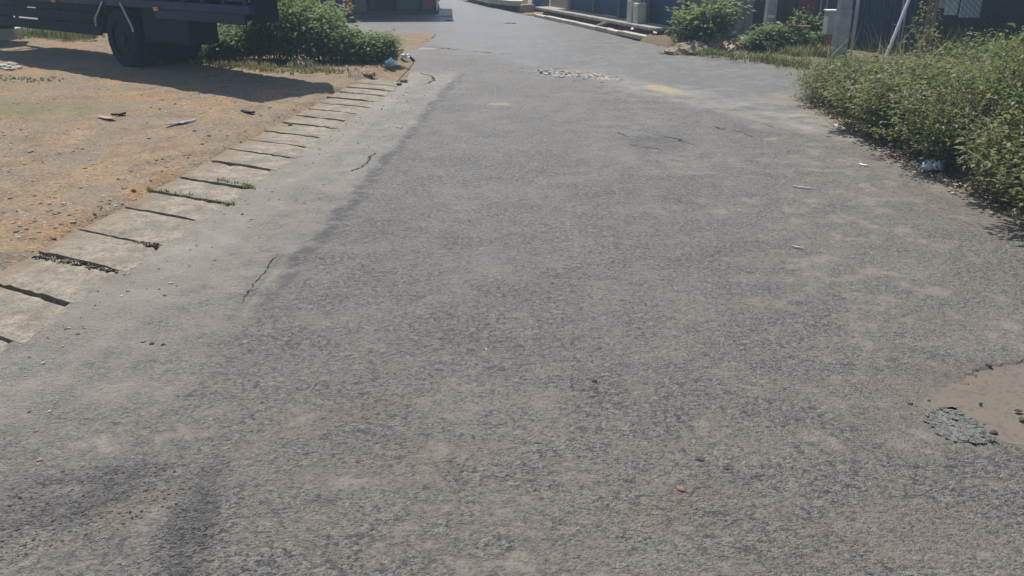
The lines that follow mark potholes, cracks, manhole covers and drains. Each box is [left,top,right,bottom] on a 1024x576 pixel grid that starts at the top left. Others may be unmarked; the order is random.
crack [618,132,695,150]
pothole [915,358,1024,445]
crack [241,252,278,304]
